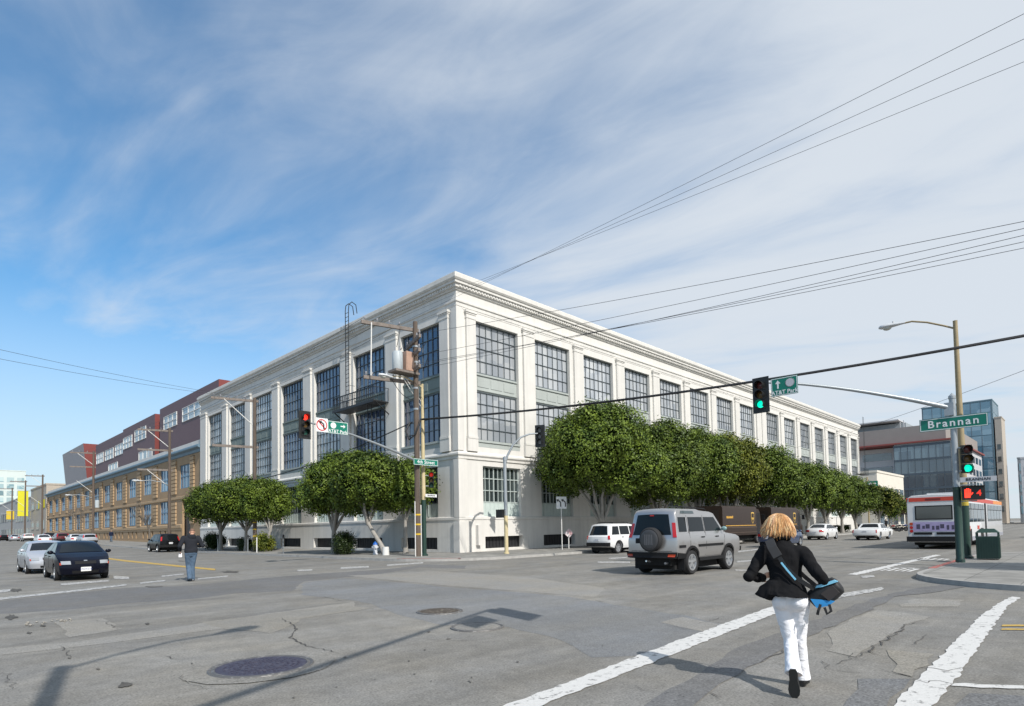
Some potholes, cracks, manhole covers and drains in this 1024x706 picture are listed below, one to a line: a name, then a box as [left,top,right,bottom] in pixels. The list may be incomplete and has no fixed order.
manhole cover [206,655,314,679]
crack [282,618,338,653]
manhole cover [450,622,504,632]
crack [822,622,960,684]
